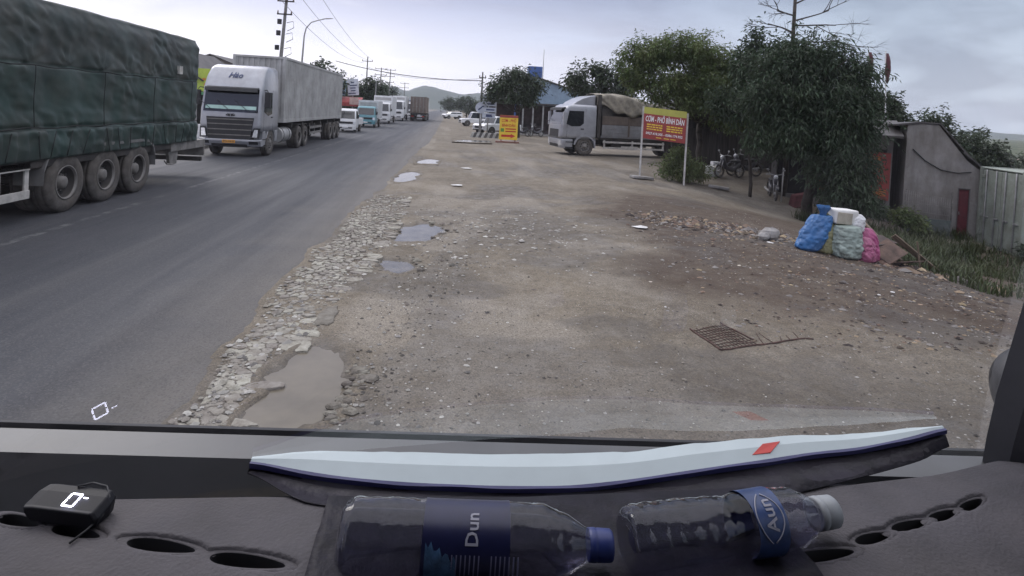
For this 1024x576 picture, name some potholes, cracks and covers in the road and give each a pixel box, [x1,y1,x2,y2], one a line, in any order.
pothole [383,220,459,243]
pothole [389,171,423,184]
pothole [222,336,379,429]
